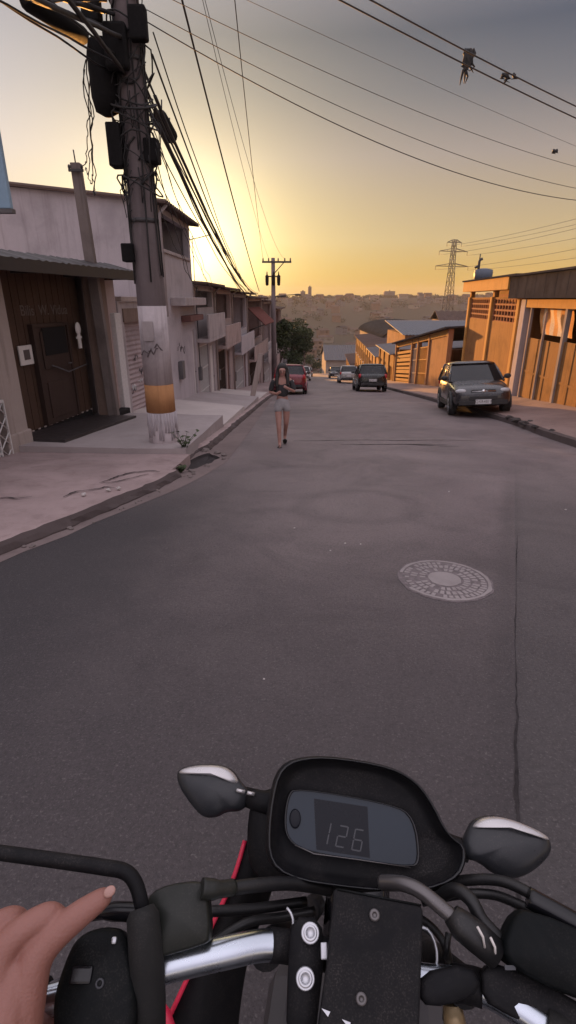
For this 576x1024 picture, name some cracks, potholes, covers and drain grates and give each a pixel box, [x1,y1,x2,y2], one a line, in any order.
manhole cover [398,560,494,603]
crack [63,470,160,497]
pothole [187,453,220,470]
crack [514,549,522,910]
